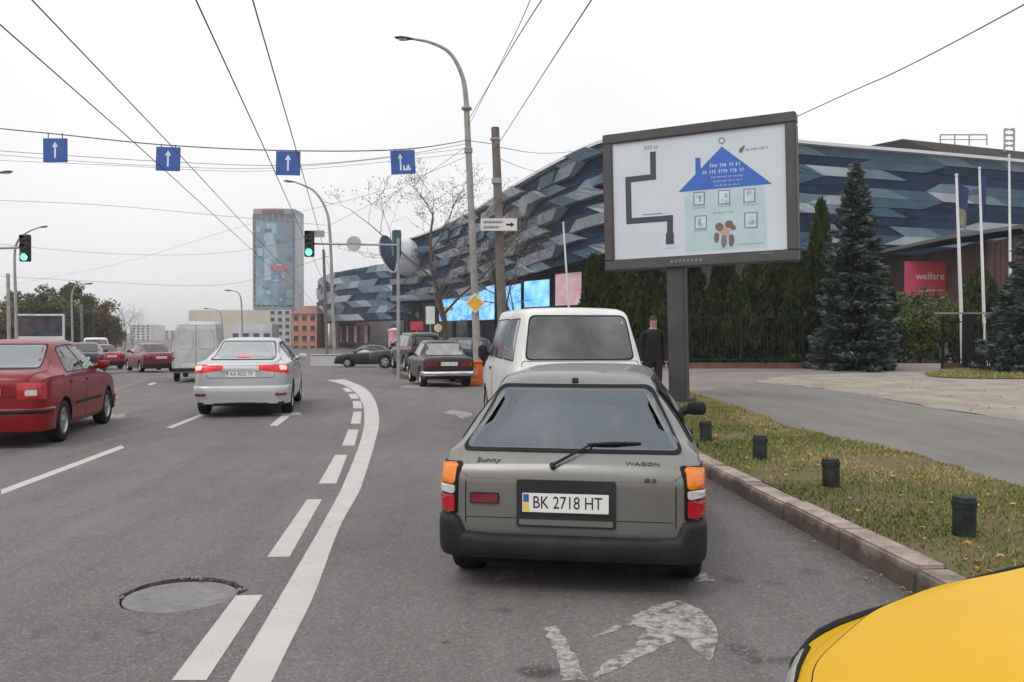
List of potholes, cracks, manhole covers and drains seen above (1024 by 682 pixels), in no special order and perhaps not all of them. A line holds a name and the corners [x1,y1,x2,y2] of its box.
manhole cover [117,575,249,613]
